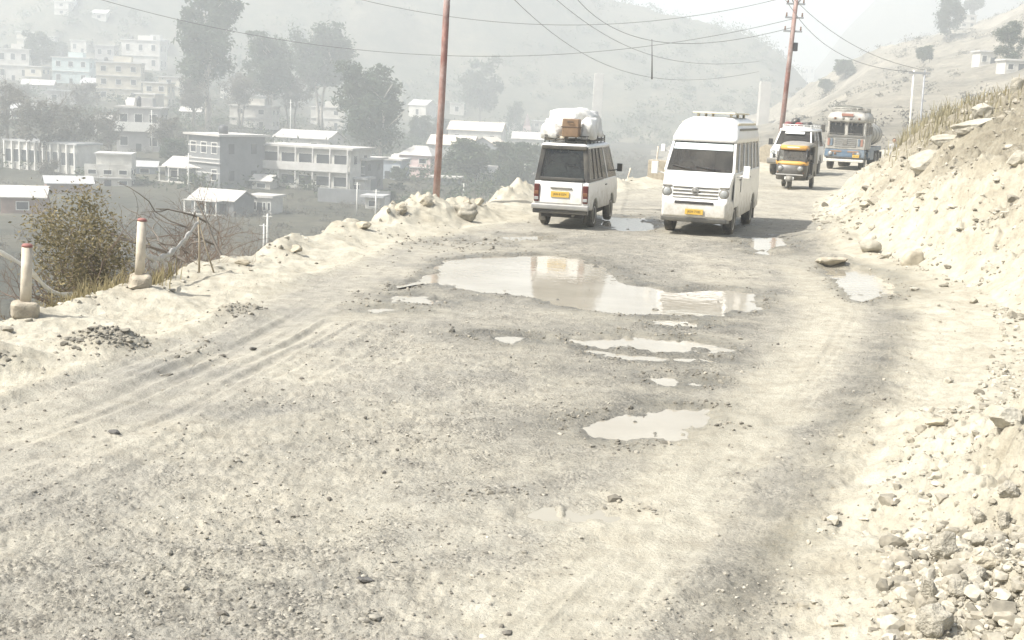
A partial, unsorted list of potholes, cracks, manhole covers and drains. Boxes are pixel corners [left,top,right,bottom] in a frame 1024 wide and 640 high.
pothole [737,235,795,255]
pothole [818,264,909,303]
pothole [596,215,659,231]
pothole [560,402,726,445]
pothole [644,370,730,388]
pothole [561,332,740,354]
pothole [575,345,728,362]
pothole [385,253,768,318]
